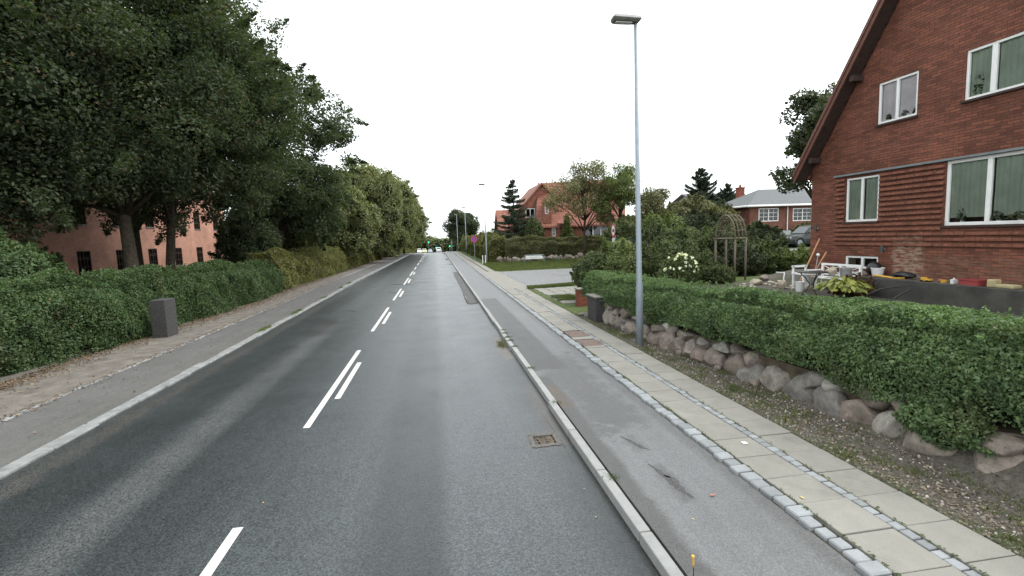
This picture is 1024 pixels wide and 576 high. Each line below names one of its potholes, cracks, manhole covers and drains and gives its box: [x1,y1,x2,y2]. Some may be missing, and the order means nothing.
crack [620,436,695,499]
drain grate [527,432,562,448]
